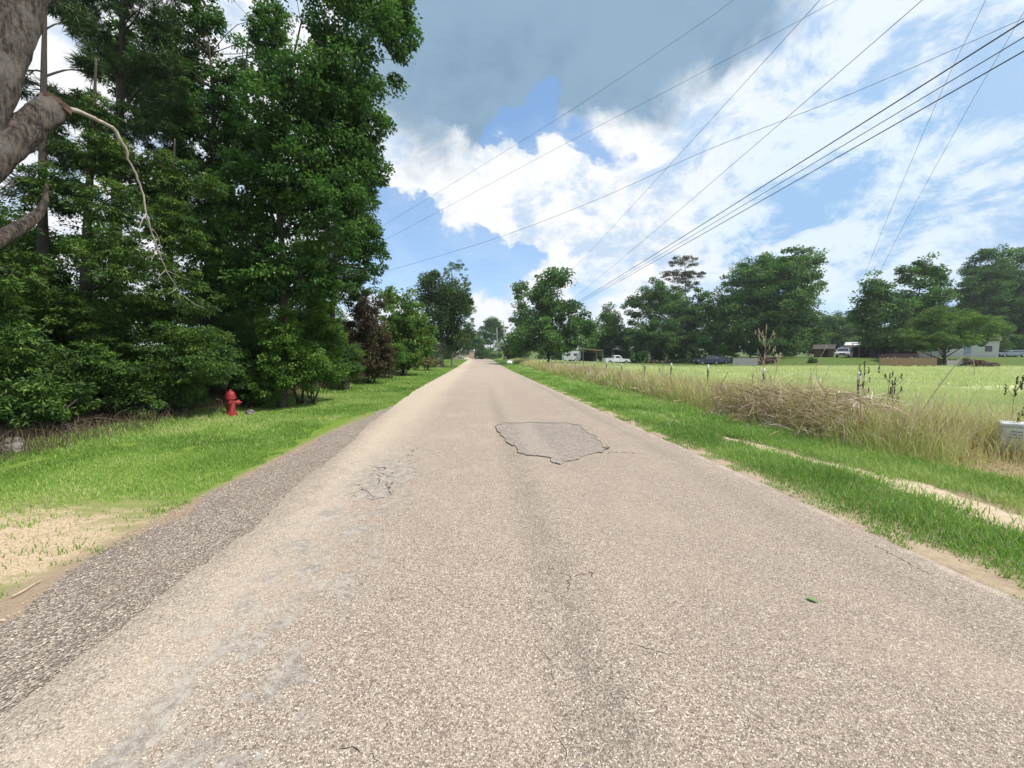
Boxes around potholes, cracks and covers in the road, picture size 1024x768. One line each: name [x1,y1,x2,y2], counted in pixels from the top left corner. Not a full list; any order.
crack [351,450,414,502]
